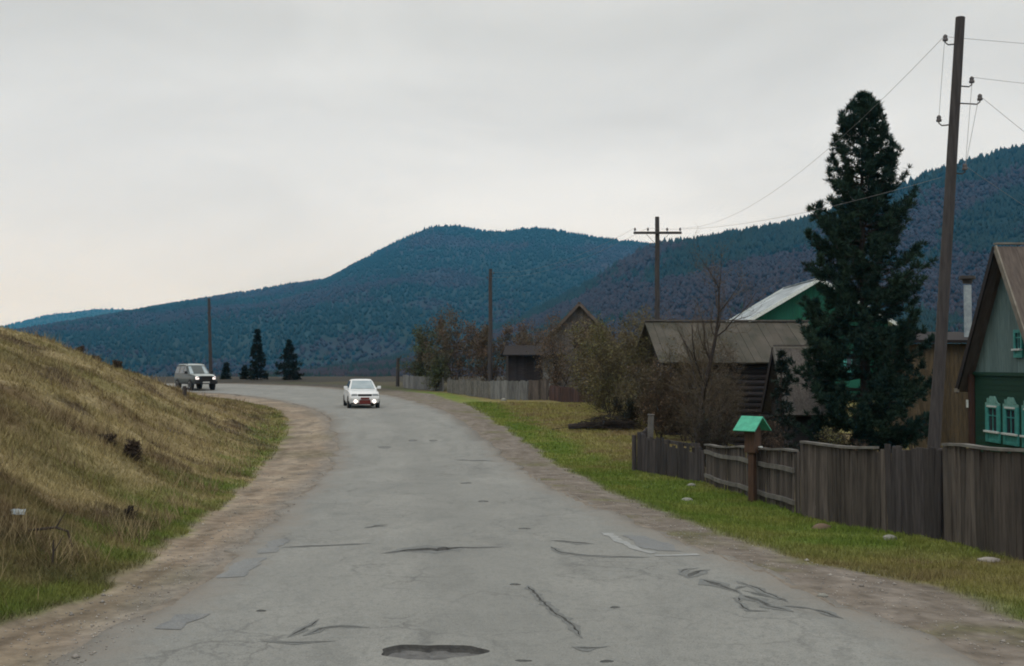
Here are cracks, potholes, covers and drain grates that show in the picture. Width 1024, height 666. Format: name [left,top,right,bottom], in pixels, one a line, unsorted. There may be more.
crack [385,545,498,554]
crack [550,540,646,558]
crack [265,619,366,645]
crack [524,585,607,652]
pothole [381,645,490,660]
crack [678,568,842,618]
